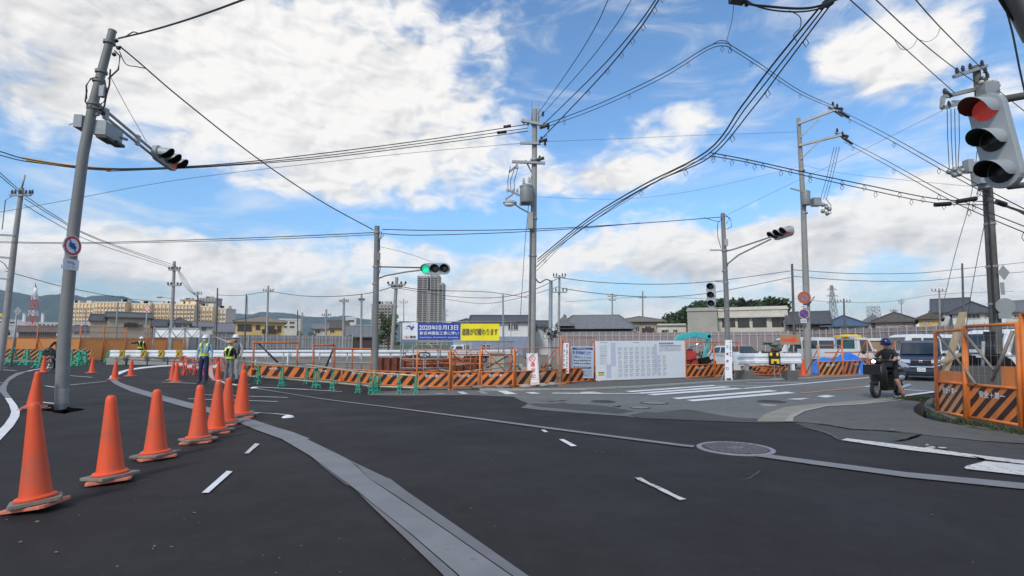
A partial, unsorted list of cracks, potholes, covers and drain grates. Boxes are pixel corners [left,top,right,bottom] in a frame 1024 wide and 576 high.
crack [802,423,922,441]
manhole cover [696,441,776,456]
